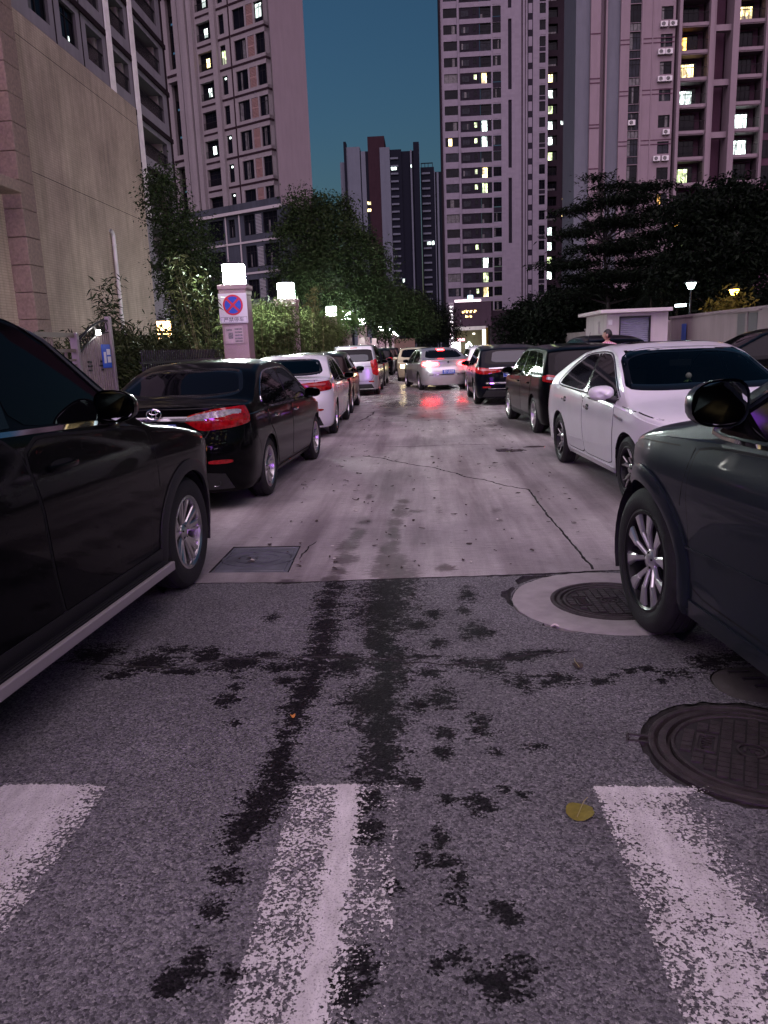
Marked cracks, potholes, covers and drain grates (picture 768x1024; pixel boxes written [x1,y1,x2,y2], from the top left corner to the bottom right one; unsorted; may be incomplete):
manhole cover [626,703,768,810]
manhole cover [710,668,768,705]
manhole cover [208,546,301,573]
manhole cover [512,572,699,636]
